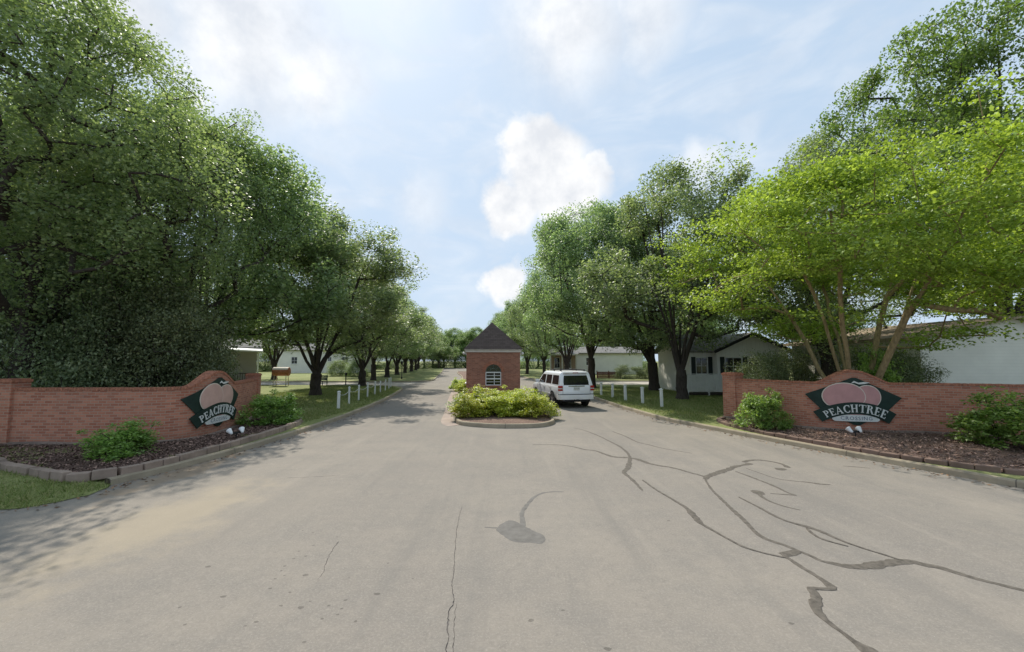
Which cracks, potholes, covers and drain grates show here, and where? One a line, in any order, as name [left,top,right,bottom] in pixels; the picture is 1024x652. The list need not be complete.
crack [533,428,1024,652]
crack [445,510,461,652]
